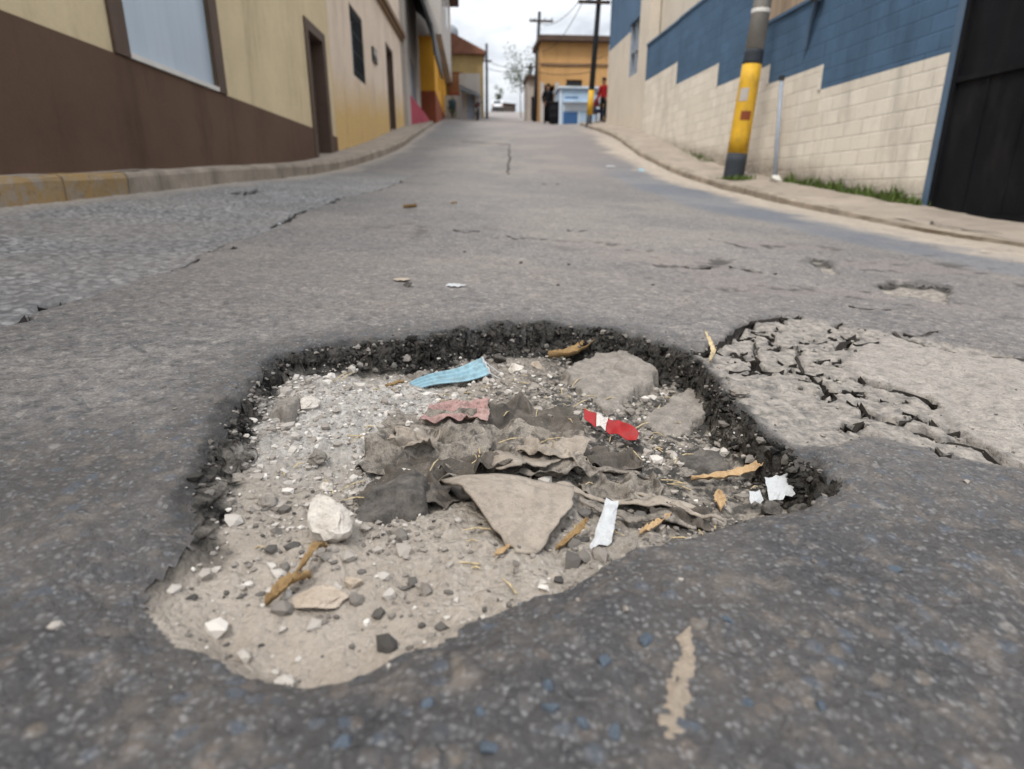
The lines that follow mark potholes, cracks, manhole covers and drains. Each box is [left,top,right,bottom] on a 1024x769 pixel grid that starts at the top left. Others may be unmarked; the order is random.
crack [693,305,1024,465]
pothole [810,258,837,275]
crack [17,302,65,324]
pothole [874,283,953,304]
crack [271,181,402,228]
pothole [143,321,842,689]
